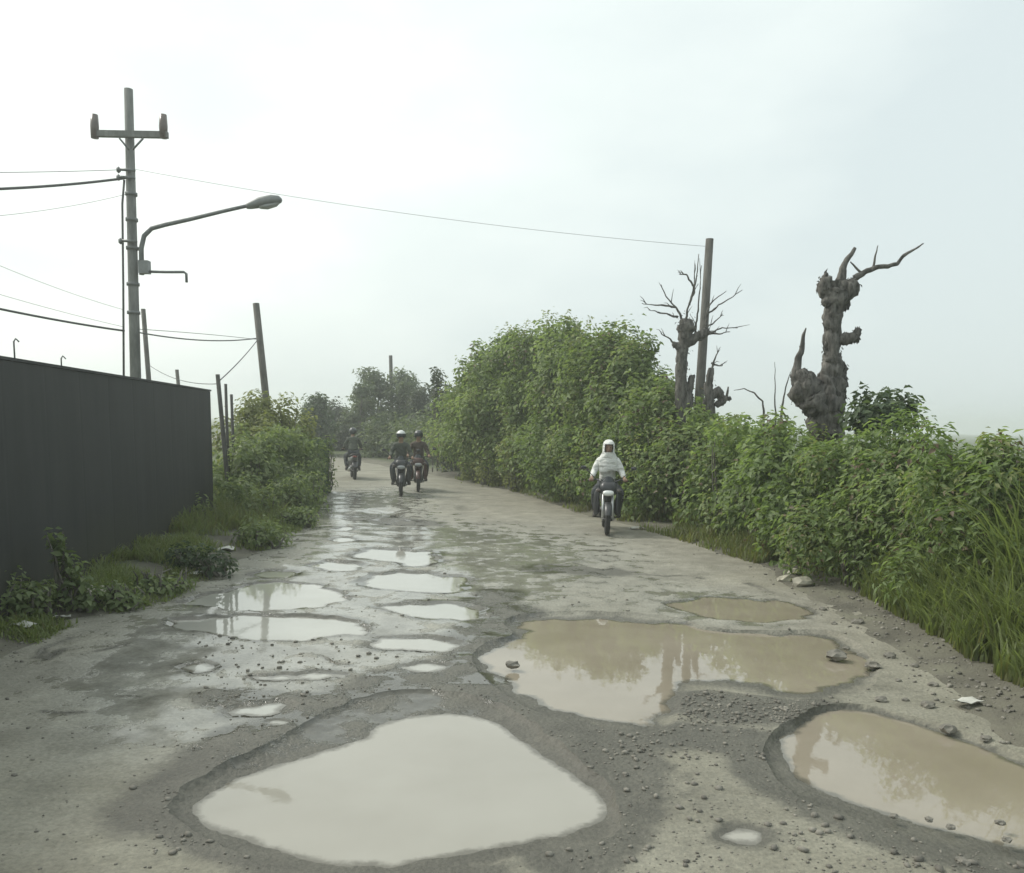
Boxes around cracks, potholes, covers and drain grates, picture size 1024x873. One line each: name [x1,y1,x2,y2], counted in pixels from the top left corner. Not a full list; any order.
pothole [472,611,879,732]
pothole [360,634,471,653]
pothole [167,688,622,873]
pothole [660,595,821,623]
pothole [173,580,353,611]
pothole [164,613,373,641]
pothole [175,660,222,674]
pothole [393,659,455,674]
pothole [763,703,1024,861]
pothole [306,559,370,572]
pothole [344,547,449,567]
pothole [711,820,772,847]
